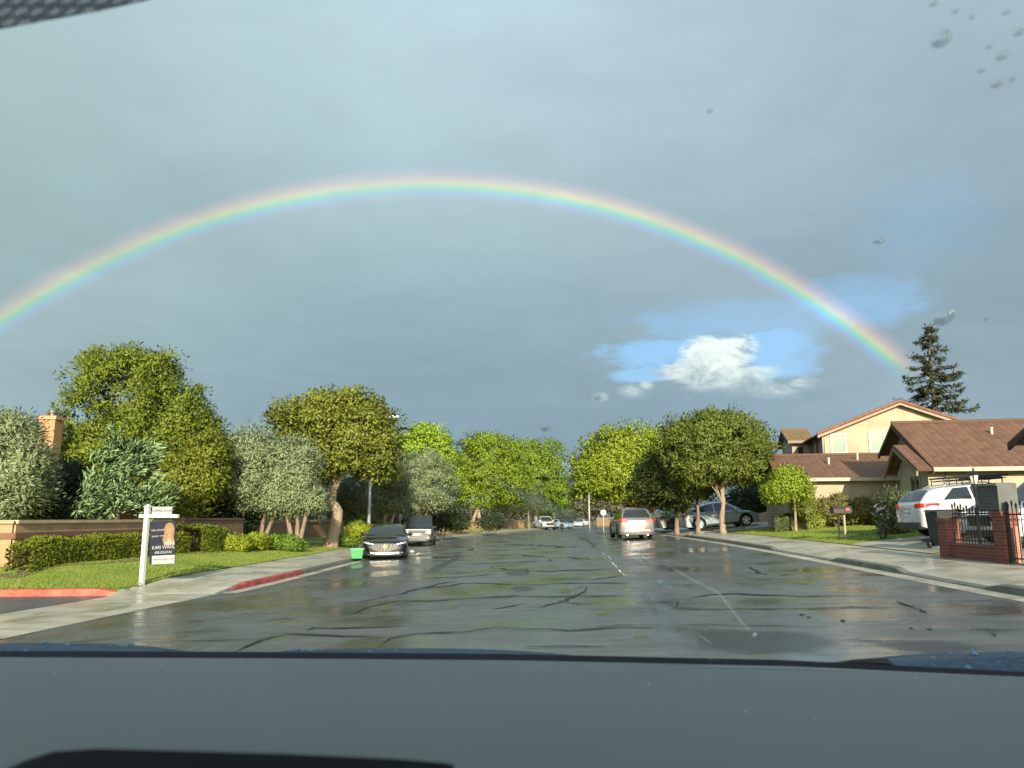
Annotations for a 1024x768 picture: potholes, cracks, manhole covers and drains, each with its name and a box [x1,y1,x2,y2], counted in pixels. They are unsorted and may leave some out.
crack [307,538,922,630]
